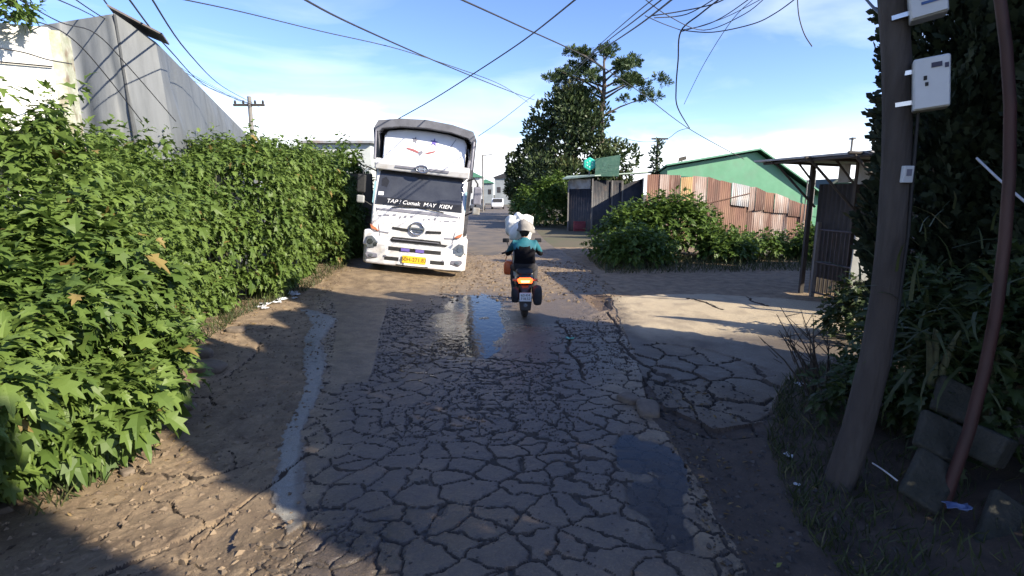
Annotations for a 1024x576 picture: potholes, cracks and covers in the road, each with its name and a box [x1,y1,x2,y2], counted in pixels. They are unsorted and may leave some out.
crack [250,297,744,576]
crack [46,450,311,576]
crack [605,307,795,439]
